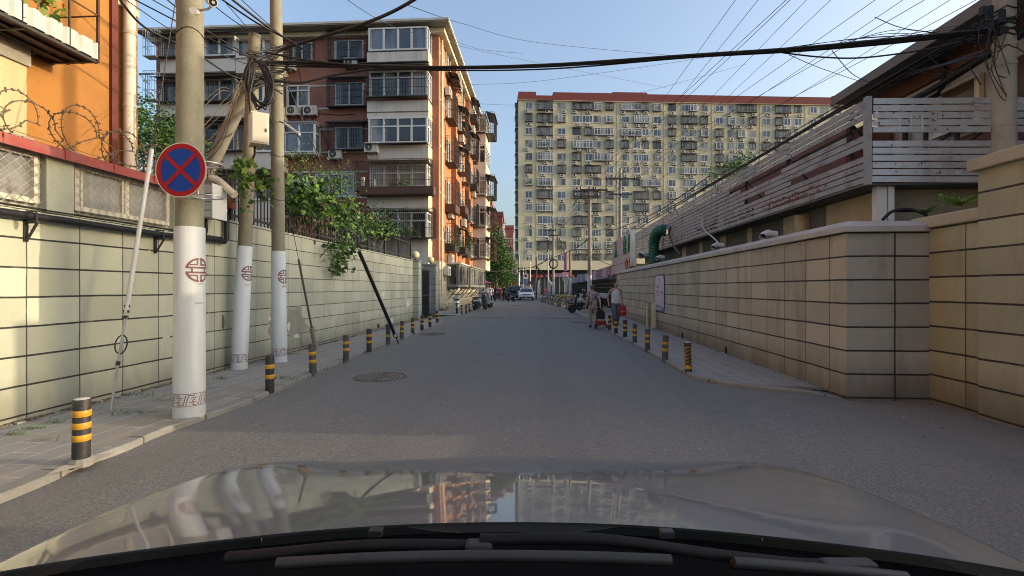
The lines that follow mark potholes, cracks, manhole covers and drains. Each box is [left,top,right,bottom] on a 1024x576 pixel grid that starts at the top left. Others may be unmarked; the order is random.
manhole cover [353,372,407,382]
